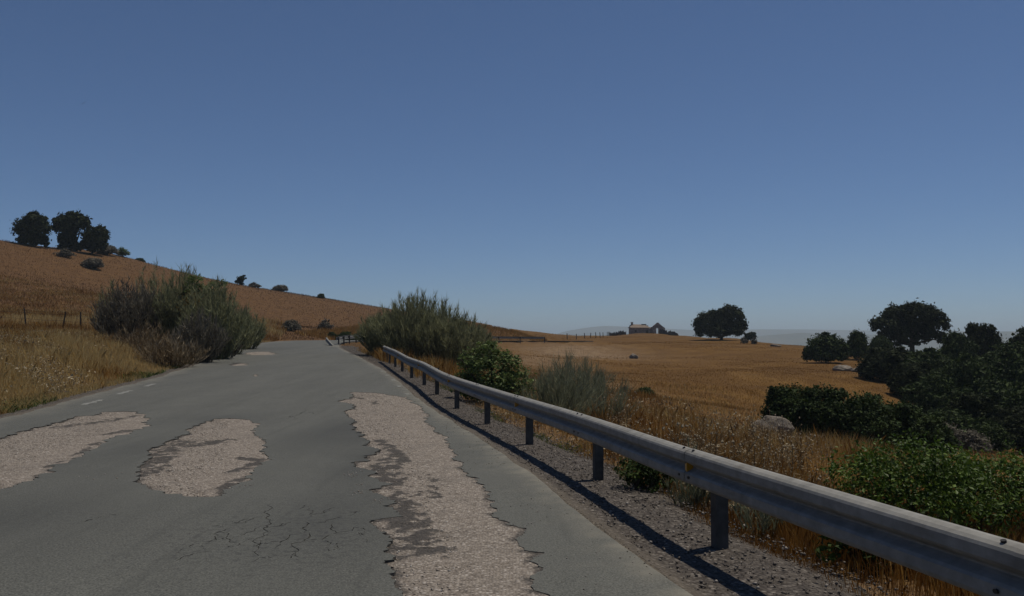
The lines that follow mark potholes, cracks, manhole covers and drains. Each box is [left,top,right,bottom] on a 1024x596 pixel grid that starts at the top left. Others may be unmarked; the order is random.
crack [176,502,365,562]
pothole [339,392,550,596]
pothole [132,418,272,497]
pothole [0,411,151,489]
